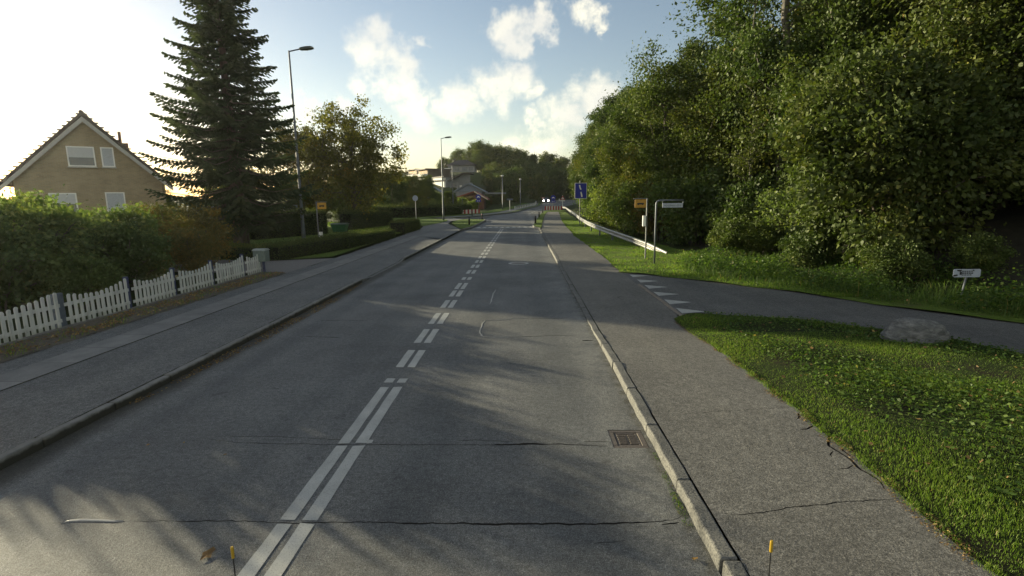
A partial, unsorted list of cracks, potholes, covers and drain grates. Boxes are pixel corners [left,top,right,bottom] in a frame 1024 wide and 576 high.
crack [694,407,897,515]
crack [61,516,682,544]
crack [211,436,607,446]
drain grate [607,430,649,448]
